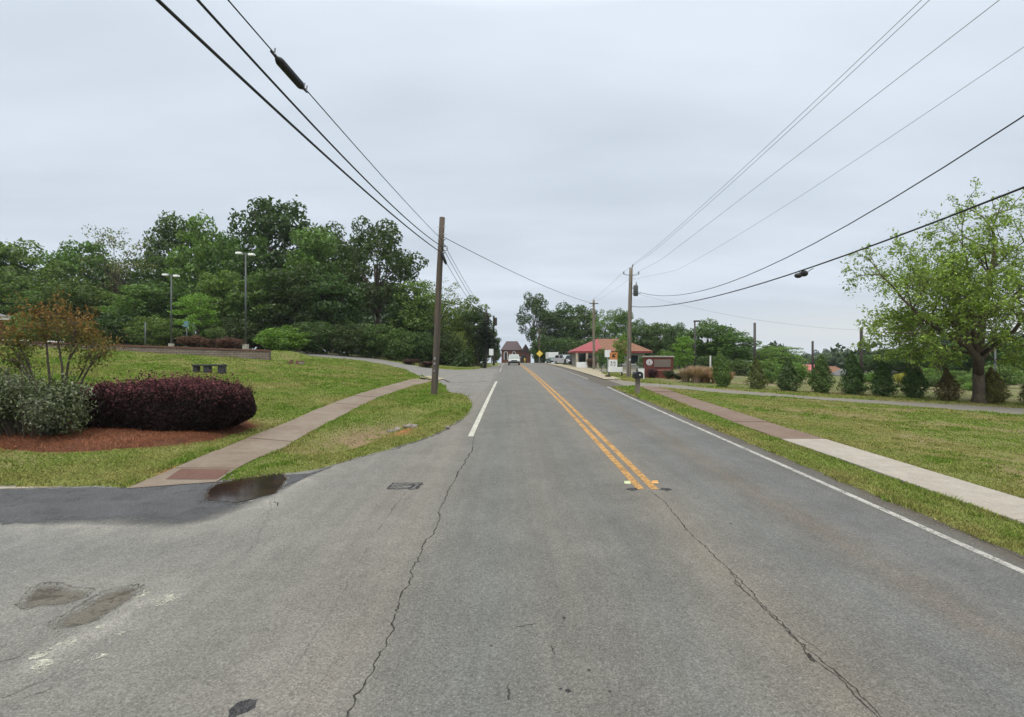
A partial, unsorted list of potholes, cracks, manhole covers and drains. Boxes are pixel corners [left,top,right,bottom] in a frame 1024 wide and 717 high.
utility cover [386,482,423,490]
crack [346,412,484,717]
pothole [205,472,287,503]
